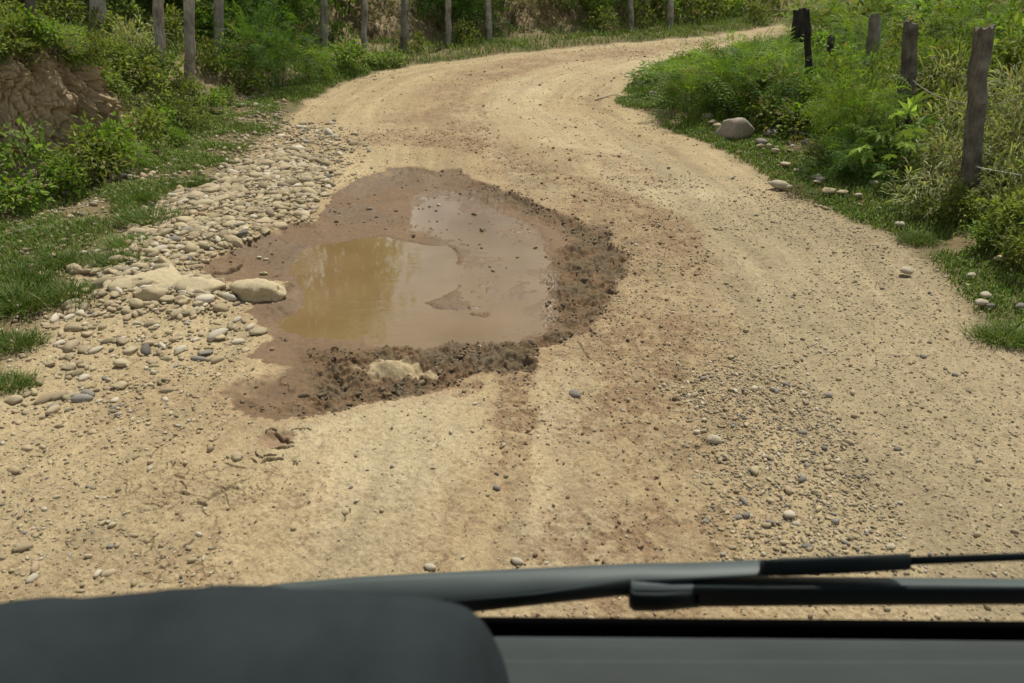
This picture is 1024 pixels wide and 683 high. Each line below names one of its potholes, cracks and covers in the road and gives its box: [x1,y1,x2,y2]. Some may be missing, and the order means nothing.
pothole [198,166,635,422]
pothole [256,429,295,449]
